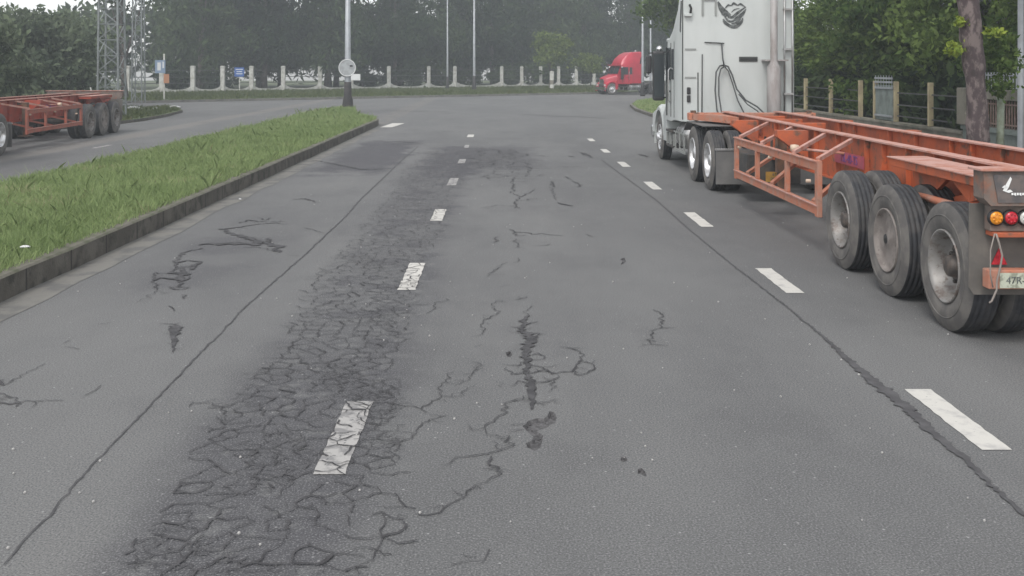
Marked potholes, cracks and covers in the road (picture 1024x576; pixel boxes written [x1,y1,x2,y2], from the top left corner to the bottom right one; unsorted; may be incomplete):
crack [0,364,52,407]
crack [117,150,596,576]
crack [639,309,675,347]
